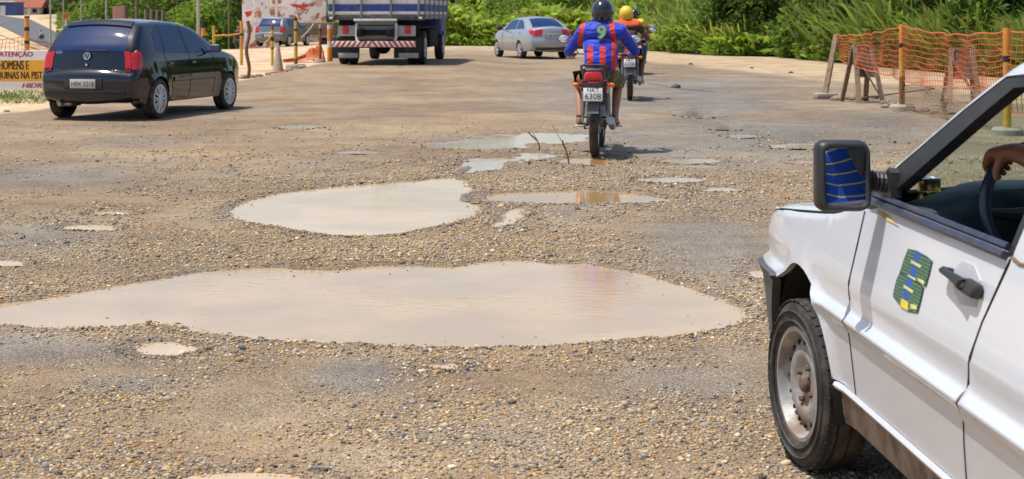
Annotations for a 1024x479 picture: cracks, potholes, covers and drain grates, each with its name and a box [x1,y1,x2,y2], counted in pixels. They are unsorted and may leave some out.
pothole [432,149,573,175]
pothole [460,187,690,205]
pothole [621,175,726,184]
pothole [0,256,767,352]
pothole [692,185,752,193]
pothole [647,157,733,165]
pothole [119,337,214,359]
pothole [406,131,610,150]
pothole [48,221,127,232]
pothole [481,204,536,228]
pothole [216,175,495,238]
